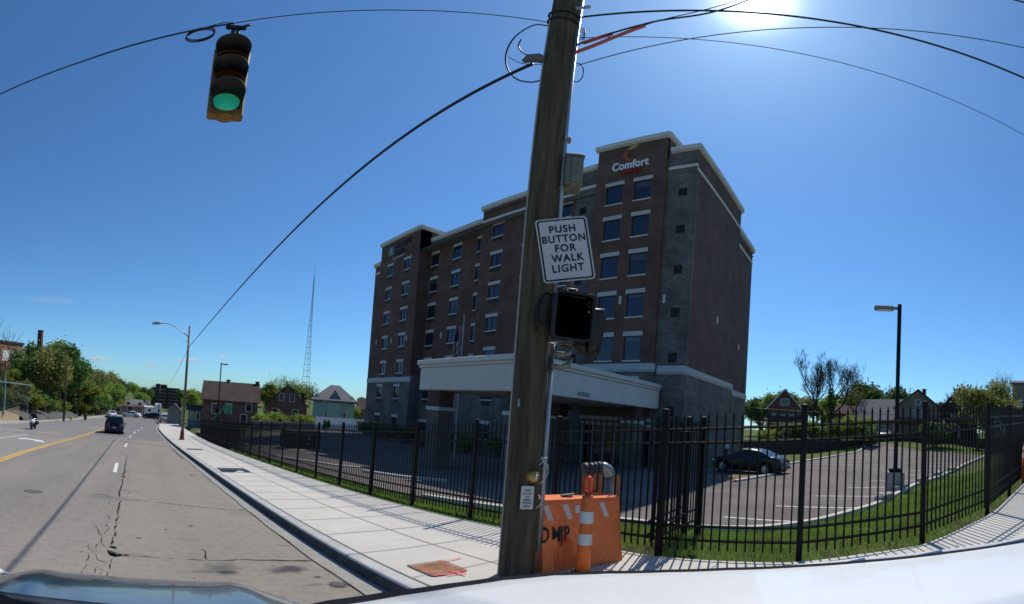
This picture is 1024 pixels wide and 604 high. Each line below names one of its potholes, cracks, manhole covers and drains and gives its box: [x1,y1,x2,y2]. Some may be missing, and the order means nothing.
crack [81,455,234,576]
